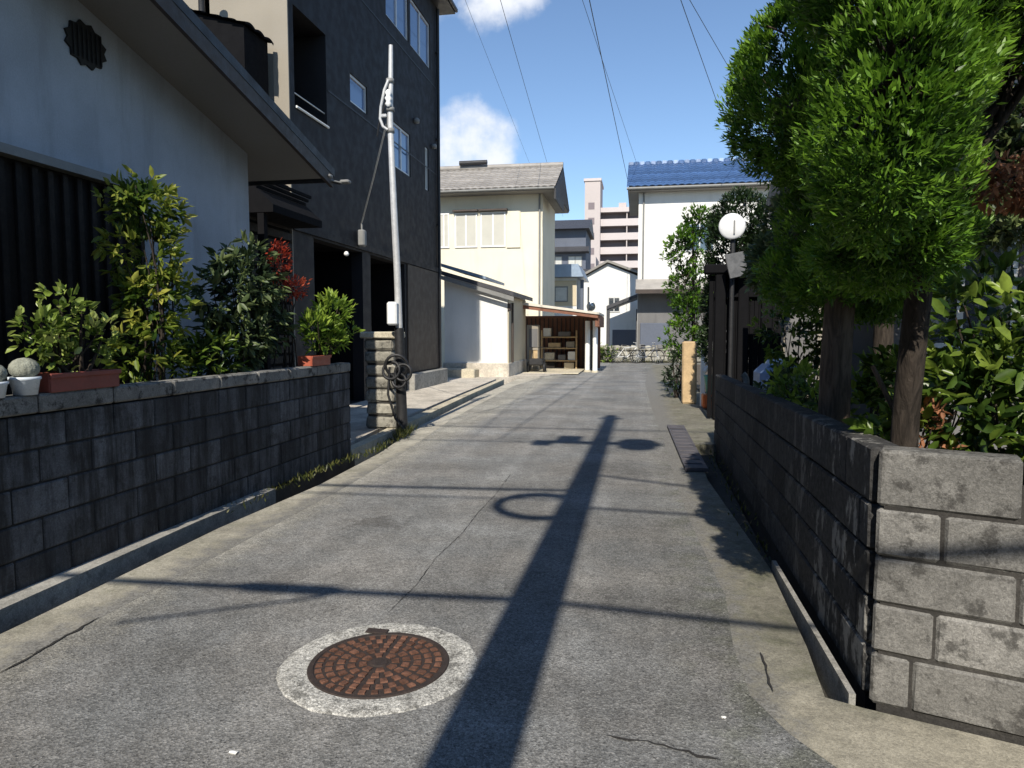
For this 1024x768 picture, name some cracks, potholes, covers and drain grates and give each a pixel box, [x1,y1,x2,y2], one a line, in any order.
crack [1,617,99,672]
manhole cover [276,623,477,718]
crack [609,735,718,759]
crack [760,652,773,691]
